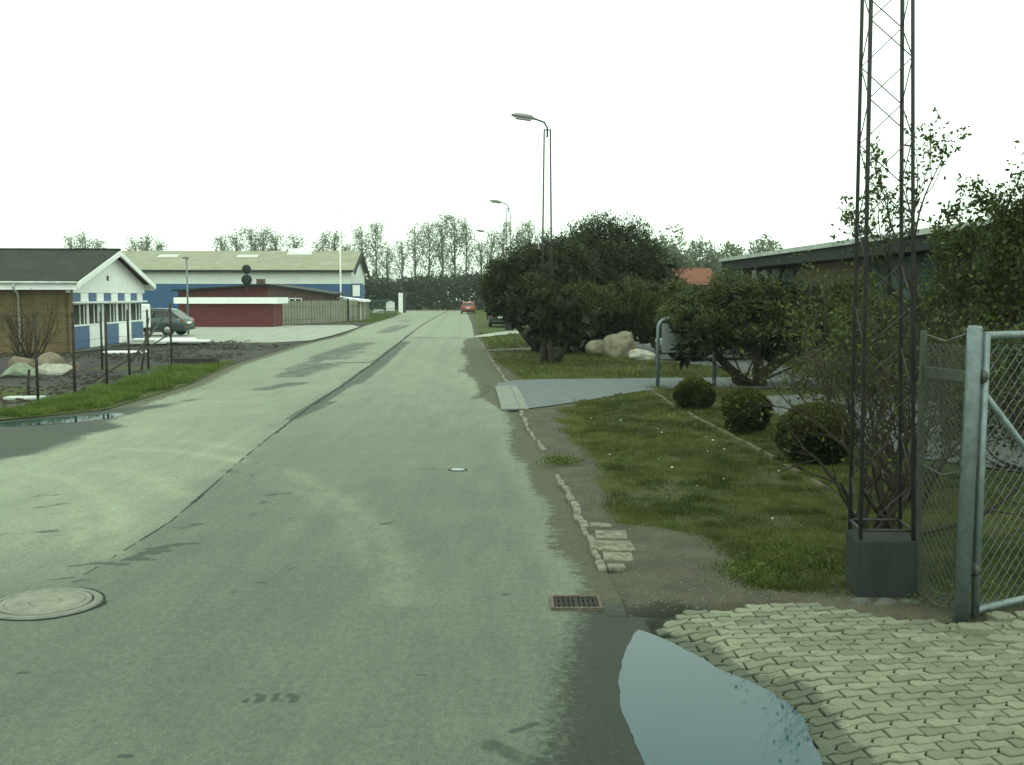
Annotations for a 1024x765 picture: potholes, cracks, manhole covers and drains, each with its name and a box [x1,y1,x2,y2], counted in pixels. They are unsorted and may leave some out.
drain grate [550,595,603,611]
manhole cover [0,588,107,621]
